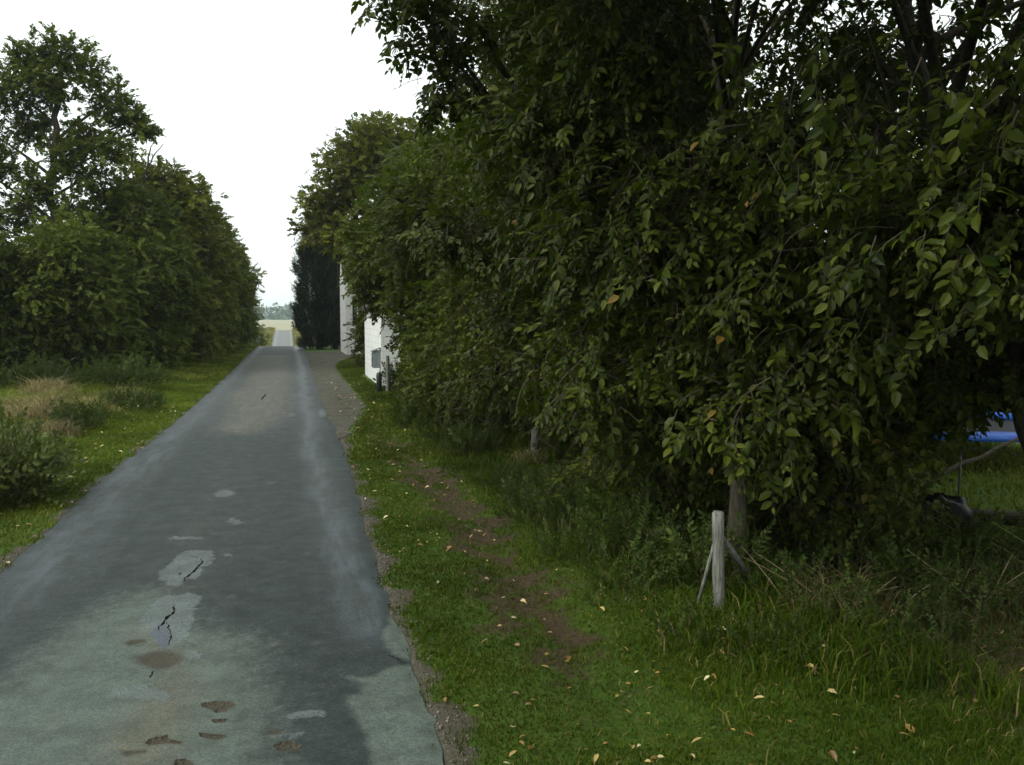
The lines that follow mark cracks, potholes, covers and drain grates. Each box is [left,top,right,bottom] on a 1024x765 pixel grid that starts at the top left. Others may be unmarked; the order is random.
crack [158,605,176,645]
pothole [145,734,182,745]
pothole [273,741,301,751]
pothole [201,701,236,713]
